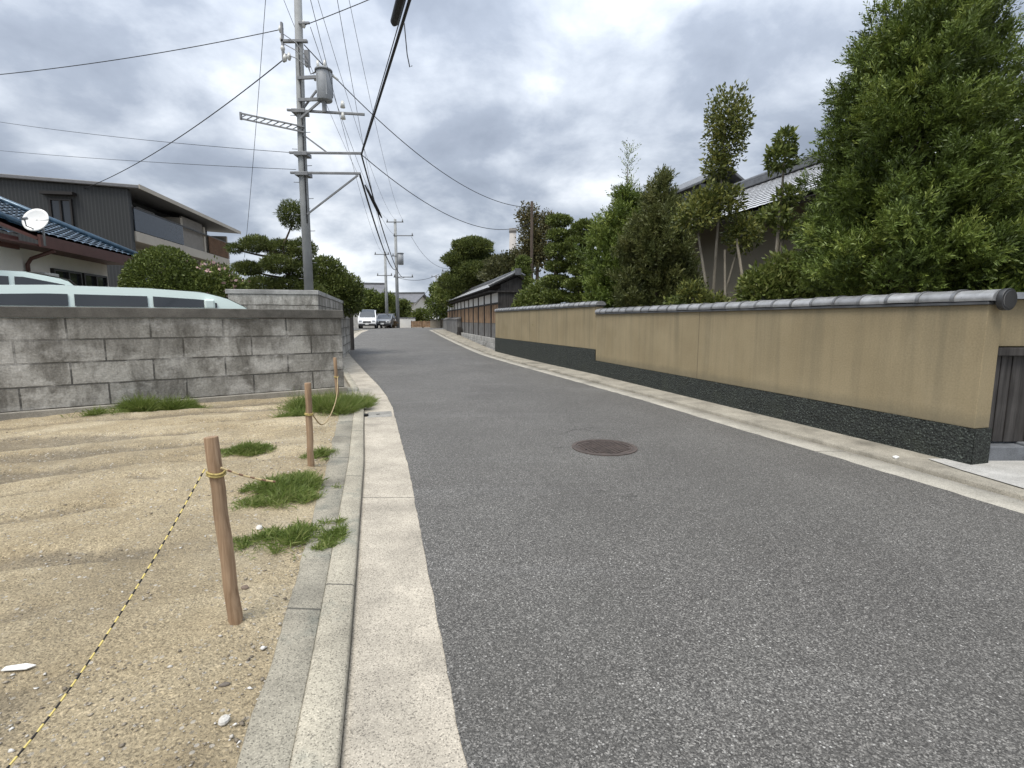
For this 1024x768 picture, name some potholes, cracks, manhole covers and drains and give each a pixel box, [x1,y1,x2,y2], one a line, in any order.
manhole cover [572,439,638,456]
